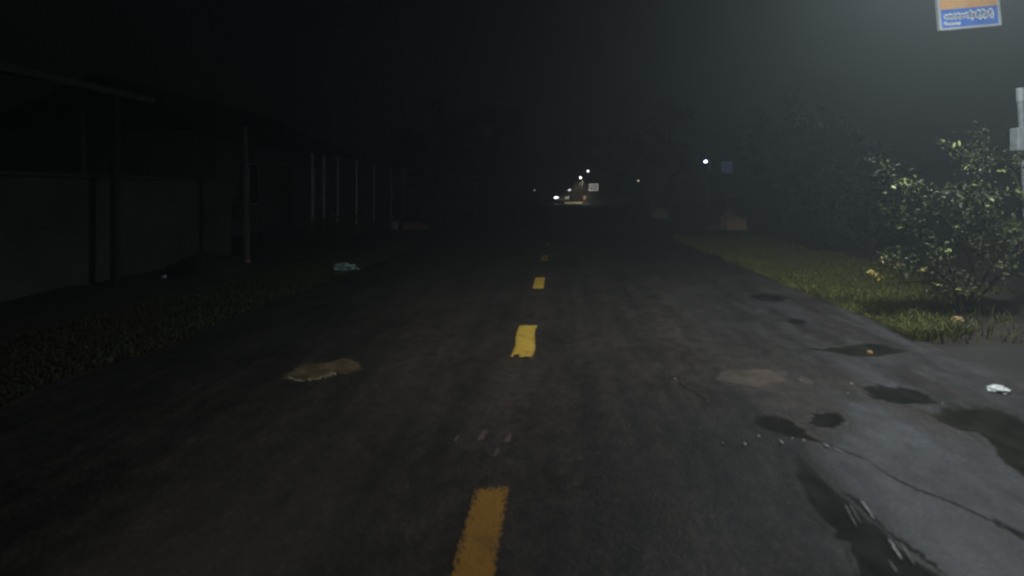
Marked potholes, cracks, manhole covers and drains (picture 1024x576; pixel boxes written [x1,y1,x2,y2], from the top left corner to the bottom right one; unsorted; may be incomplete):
crack [789,440,1024,574]
pothole [800,409,851,433]
pothole [740,411,834,448]
pothole [743,291,796,304]
pothole [782,342,923,359]
pothole [846,379,947,408]
pothole [776,443,950,576]
